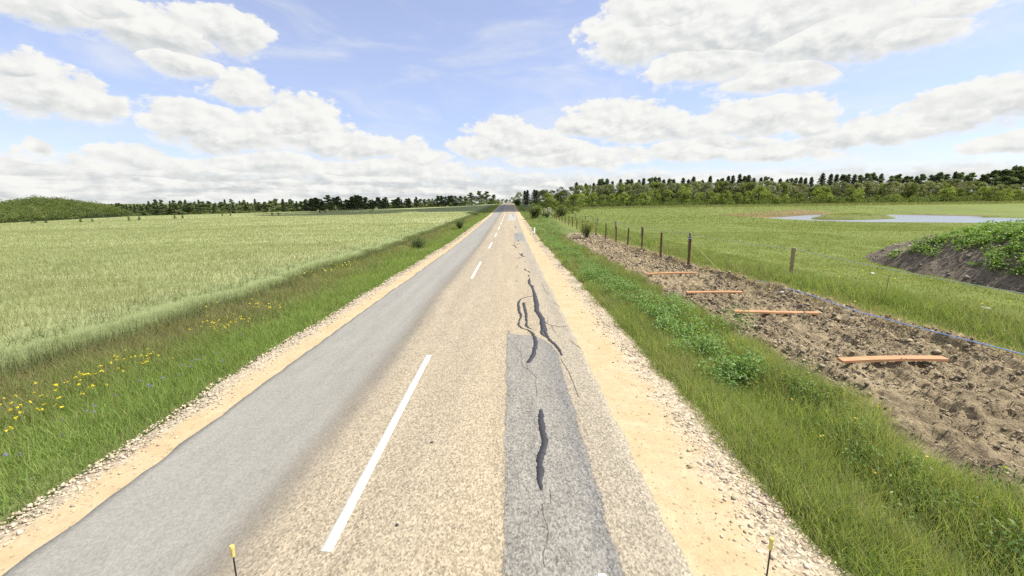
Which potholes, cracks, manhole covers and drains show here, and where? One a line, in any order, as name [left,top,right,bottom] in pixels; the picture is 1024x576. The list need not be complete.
crack [542,489,552,567]
crack [509,208,581,395]
